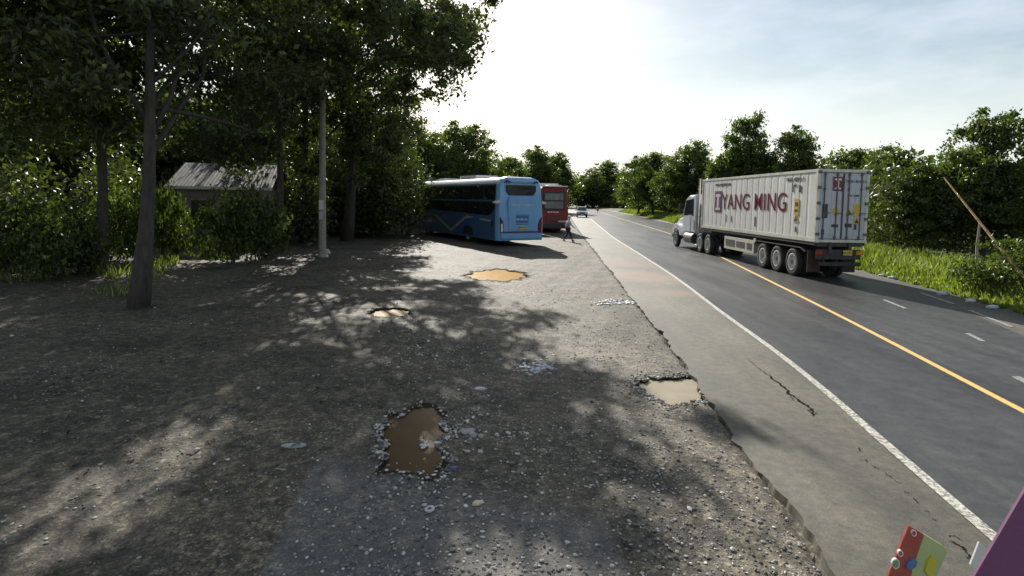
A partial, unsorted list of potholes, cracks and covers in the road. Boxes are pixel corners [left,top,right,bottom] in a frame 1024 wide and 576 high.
crack [749,360,818,416]
pothole [460,268,533,283]
crack [858,448,971,560]
pothole [628,375,705,408]
pothole [372,401,457,484]
pothole [366,307,416,318]
